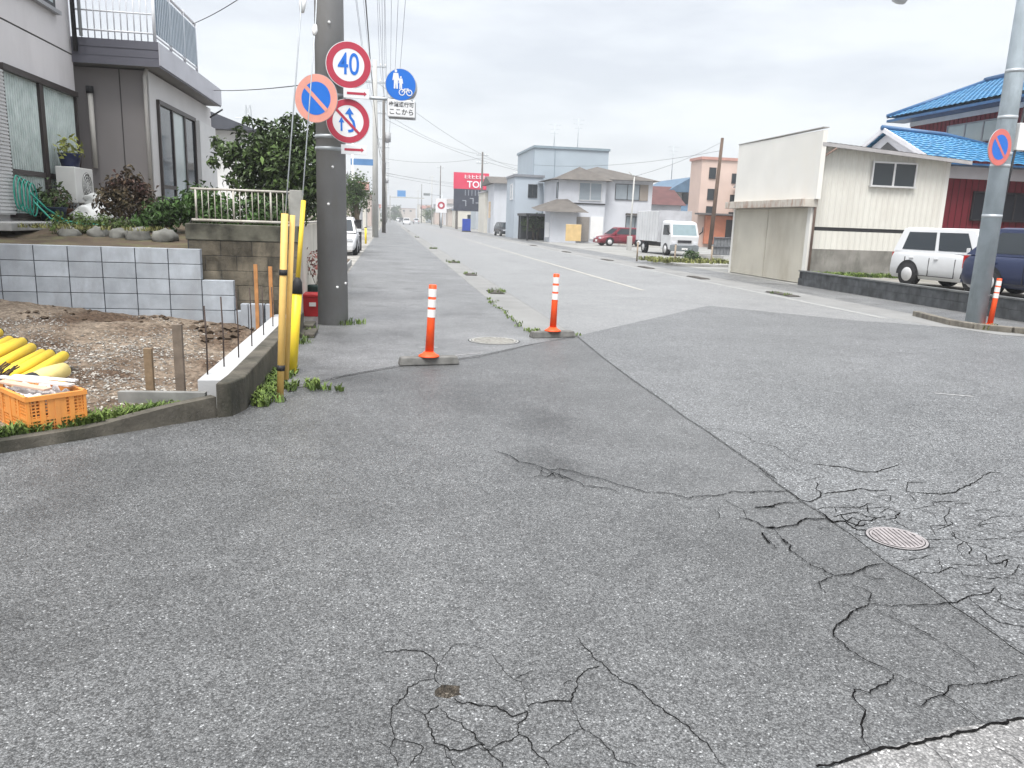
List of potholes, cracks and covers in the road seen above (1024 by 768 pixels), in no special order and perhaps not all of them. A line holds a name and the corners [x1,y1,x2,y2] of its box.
manhole cover [864,527,930,551]
crack [378,637,726,767]
pothole [434,685,461,698]
crack [816,603,1024,767]
crack [494,338,1024,635]
manhole cover [468,337,520,345]
